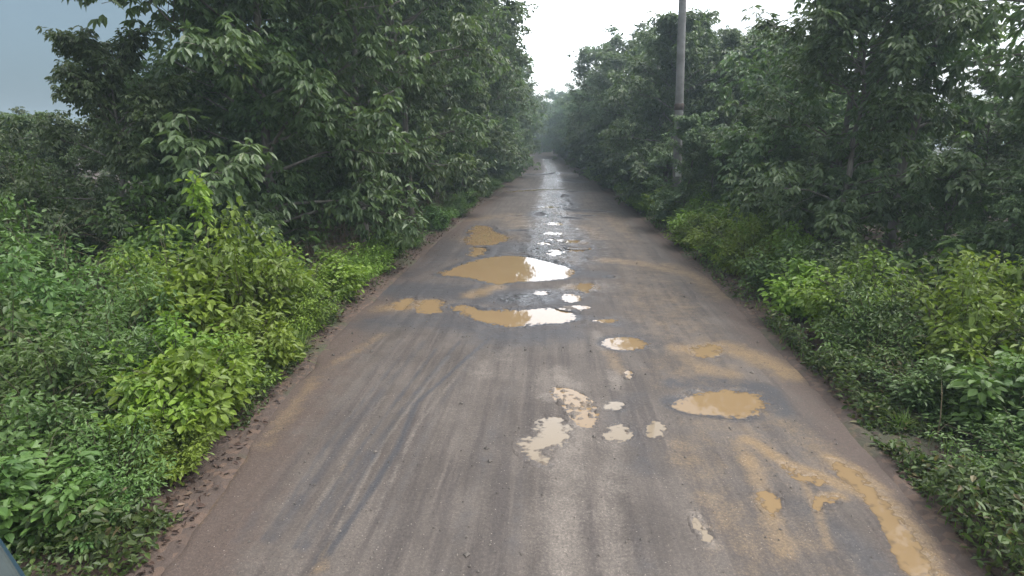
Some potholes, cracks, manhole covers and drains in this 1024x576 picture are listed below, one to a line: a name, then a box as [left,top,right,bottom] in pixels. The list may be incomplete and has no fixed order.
pothole [387,296,422,311]
pothole [641,418,669,439]
pothole [440,303,585,329]
pothole [599,399,629,412]
pothole [546,385,602,428]
pothole [659,385,777,422]
pothole [432,253,584,286]
pothole [407,298,450,315]
pothole [593,333,655,352]
pothole [458,224,518,247]
pothole [557,292,586,303]
pothole [511,412,578,471]
